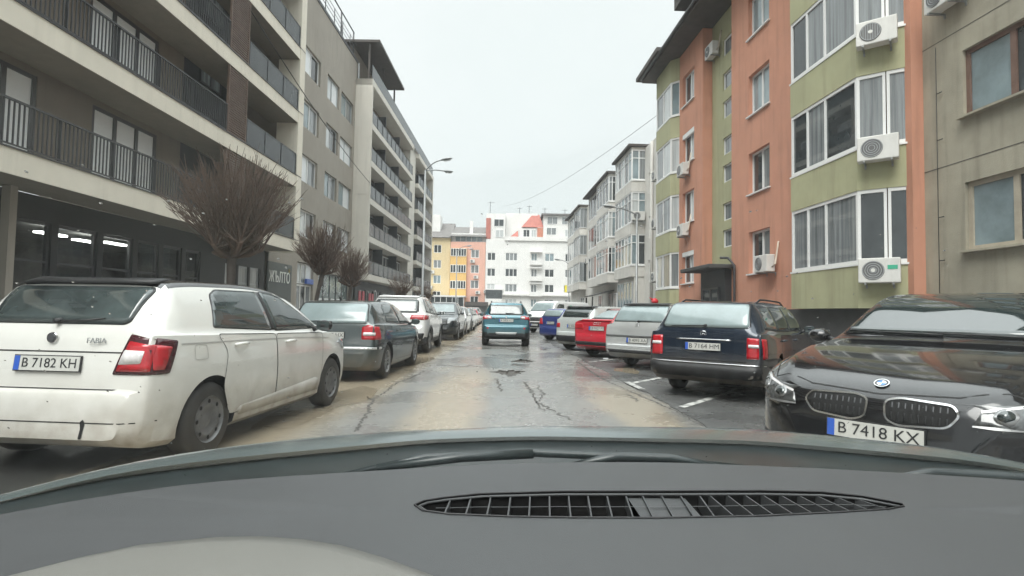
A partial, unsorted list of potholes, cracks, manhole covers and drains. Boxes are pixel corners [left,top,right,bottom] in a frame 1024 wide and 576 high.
pothole [486,369,529,377]
crack [354,371,425,432]
crack [524,382,570,420]
